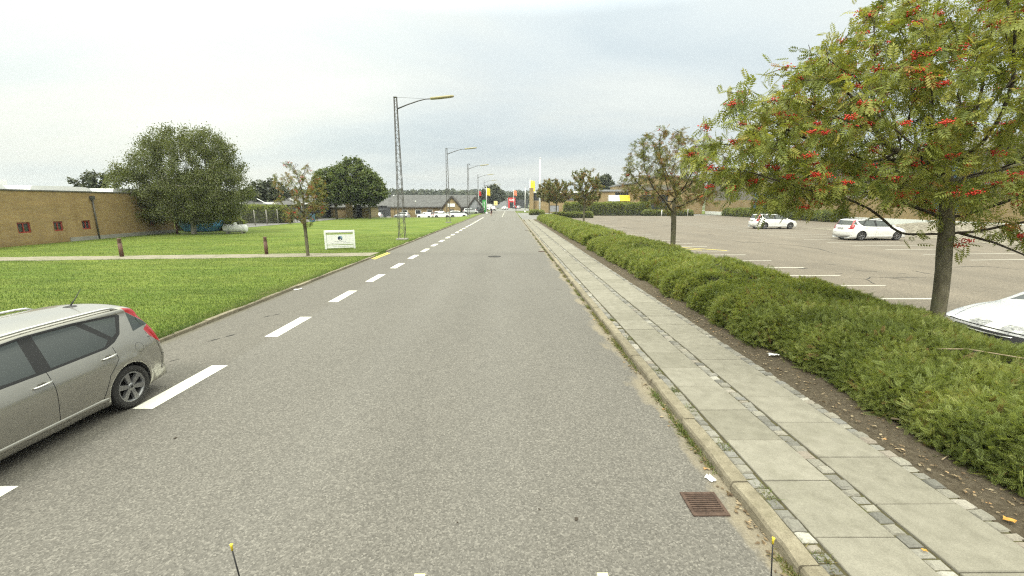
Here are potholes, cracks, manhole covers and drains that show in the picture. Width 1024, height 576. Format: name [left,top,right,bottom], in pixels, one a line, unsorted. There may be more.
drain grate [680,492,731,517]
